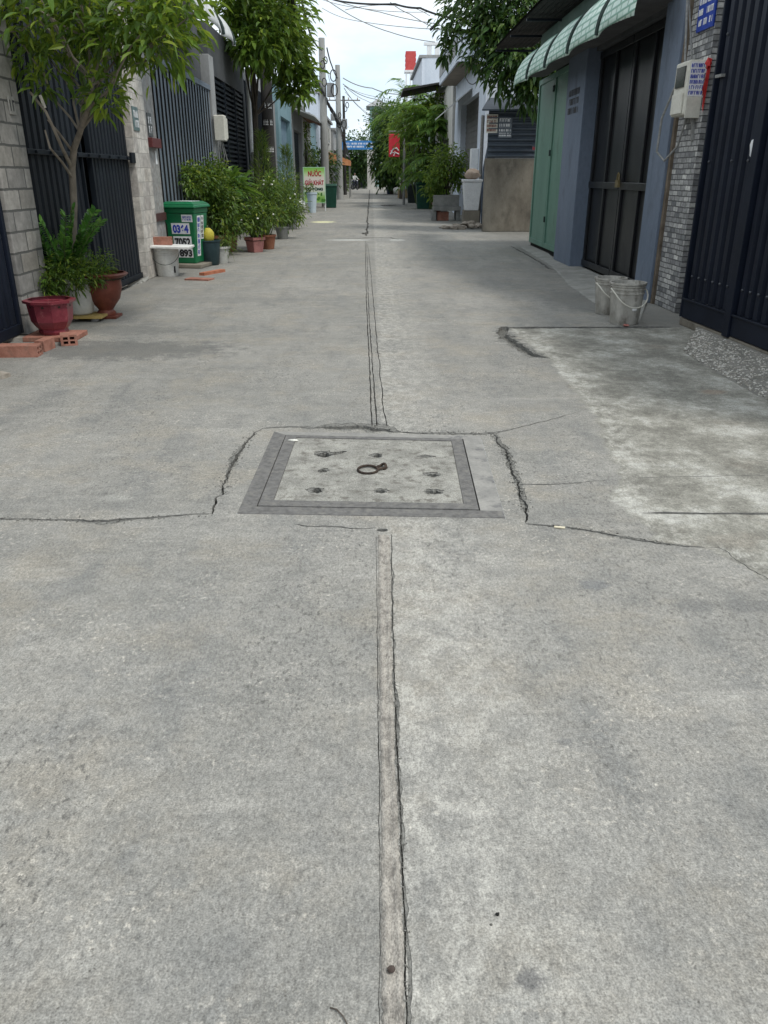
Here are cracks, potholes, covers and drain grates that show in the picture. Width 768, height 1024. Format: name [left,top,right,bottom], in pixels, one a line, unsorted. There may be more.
crack [0,412,768,1024]
manhole cover [237,431,505,518]
